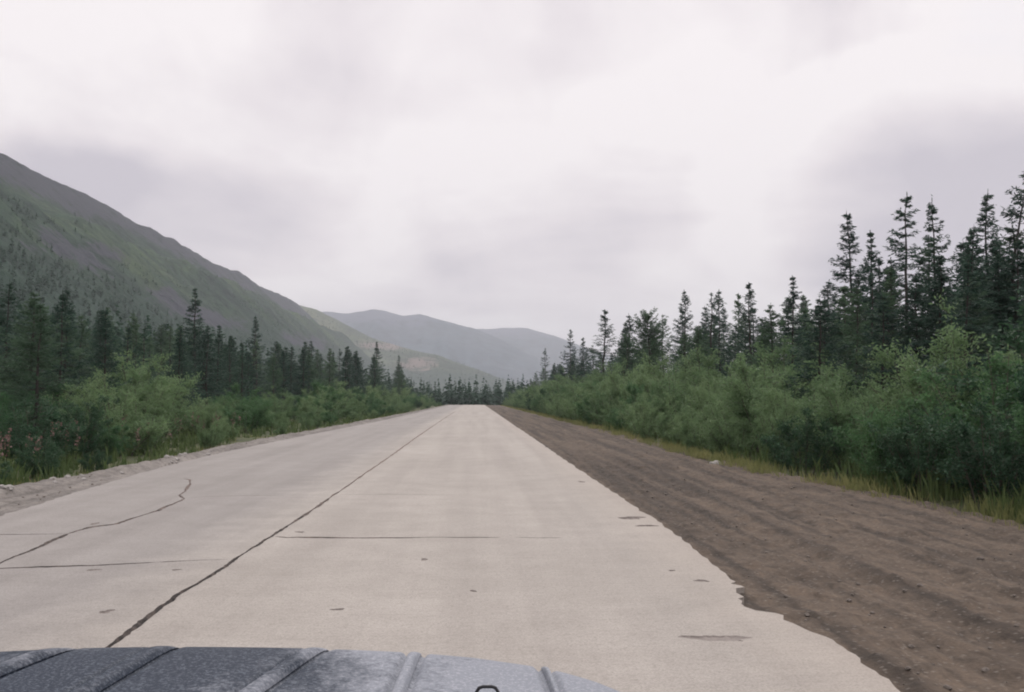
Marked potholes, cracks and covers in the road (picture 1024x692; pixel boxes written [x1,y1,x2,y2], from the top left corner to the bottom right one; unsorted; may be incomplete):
crack [0,412,531,648]
